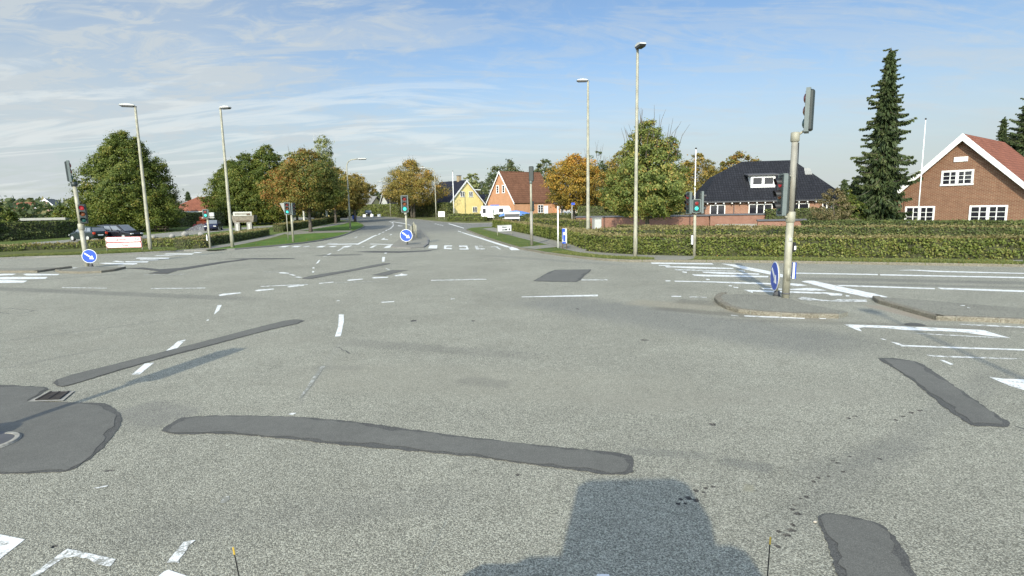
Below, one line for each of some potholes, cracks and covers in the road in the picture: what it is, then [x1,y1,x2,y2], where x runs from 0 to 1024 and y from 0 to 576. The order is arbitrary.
drain grate [28,391,74,402]
